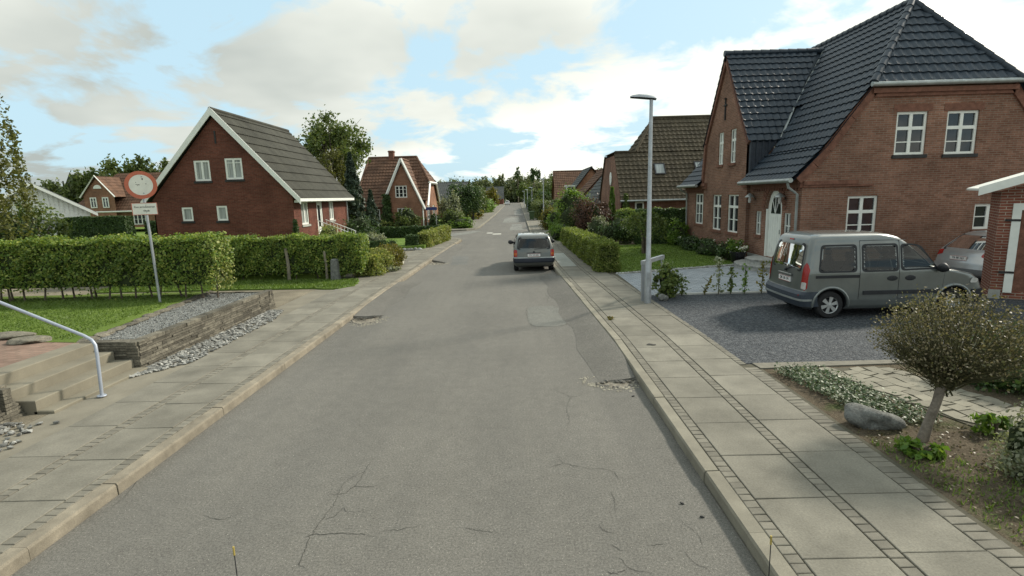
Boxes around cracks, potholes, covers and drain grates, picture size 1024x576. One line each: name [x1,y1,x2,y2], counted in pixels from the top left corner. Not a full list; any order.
pothole [579,376,639,392]
crack [296,471,404,567]
crack [555,455,657,574]
pothole [348,315,387,327]
